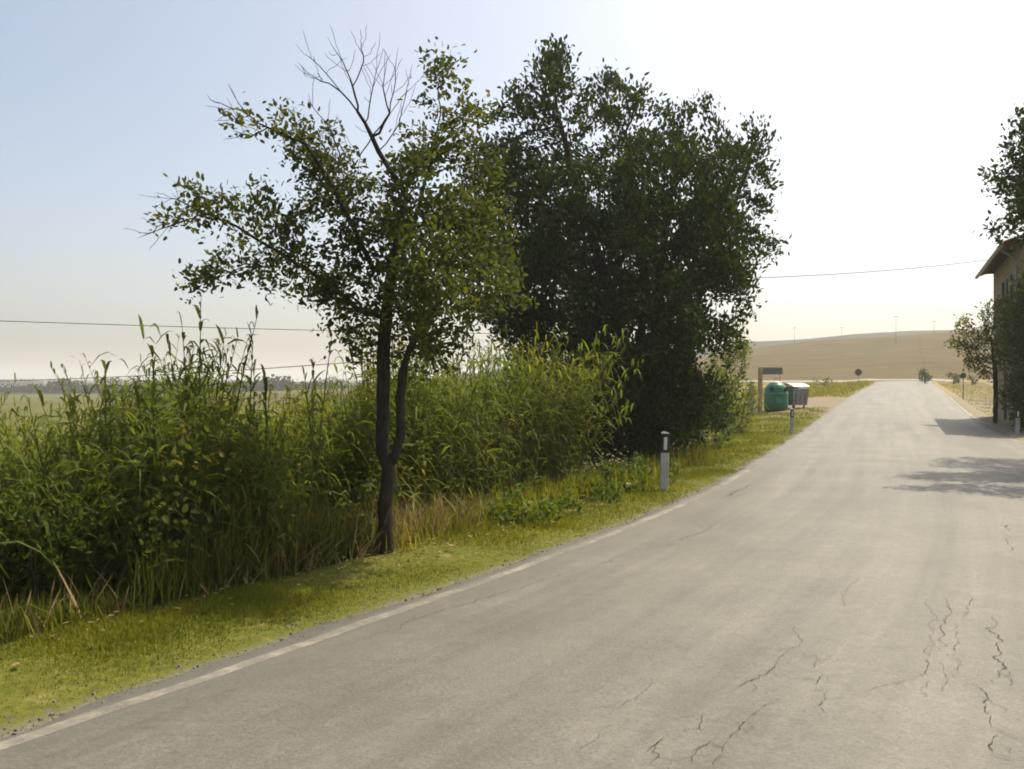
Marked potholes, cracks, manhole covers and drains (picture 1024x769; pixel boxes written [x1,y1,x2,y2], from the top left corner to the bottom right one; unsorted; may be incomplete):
crack [646,628,836,769]
crack [958,618,1024,761]
